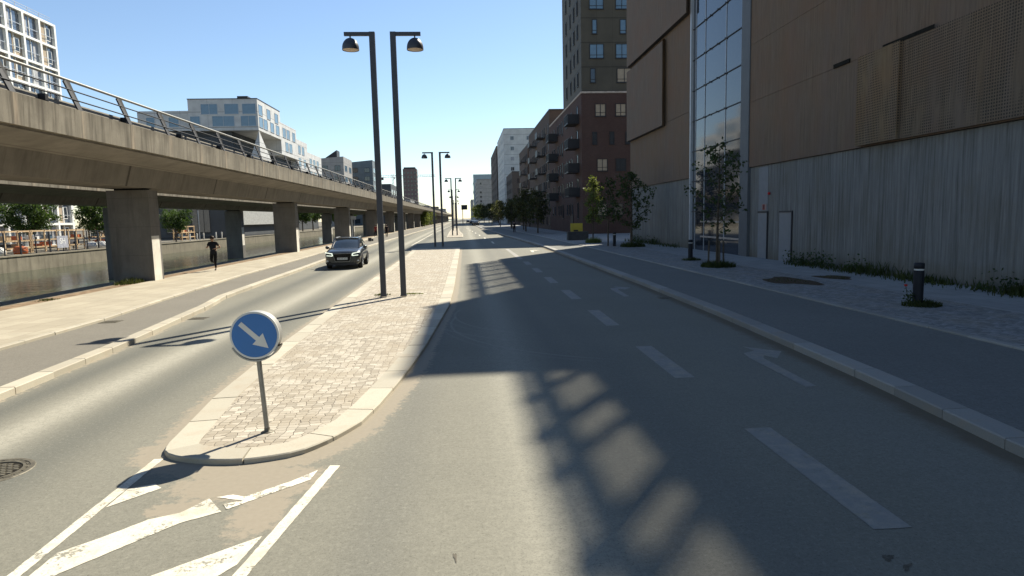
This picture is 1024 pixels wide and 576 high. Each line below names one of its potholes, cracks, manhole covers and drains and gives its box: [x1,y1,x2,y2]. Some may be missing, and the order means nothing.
manhole cover [0,458,36,481]
